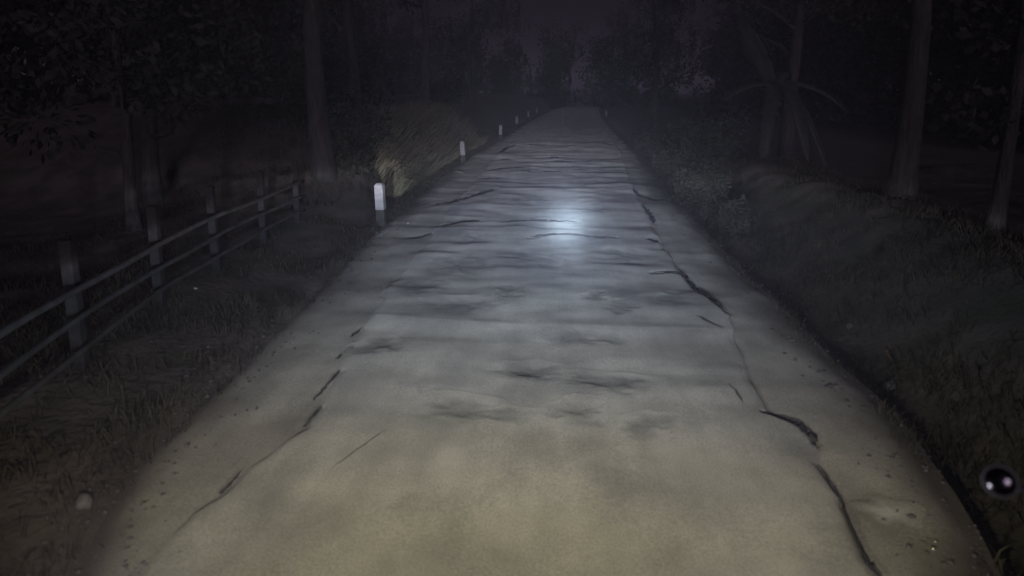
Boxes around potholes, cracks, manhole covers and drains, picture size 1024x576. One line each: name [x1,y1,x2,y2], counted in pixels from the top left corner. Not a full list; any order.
crack [408,144,677,242]
crack [818,465,881,576]
crack [218,470,242,494]
crack [303,328,361,427]
crack [653,271,727,328]
crack [766,411,818,442]
